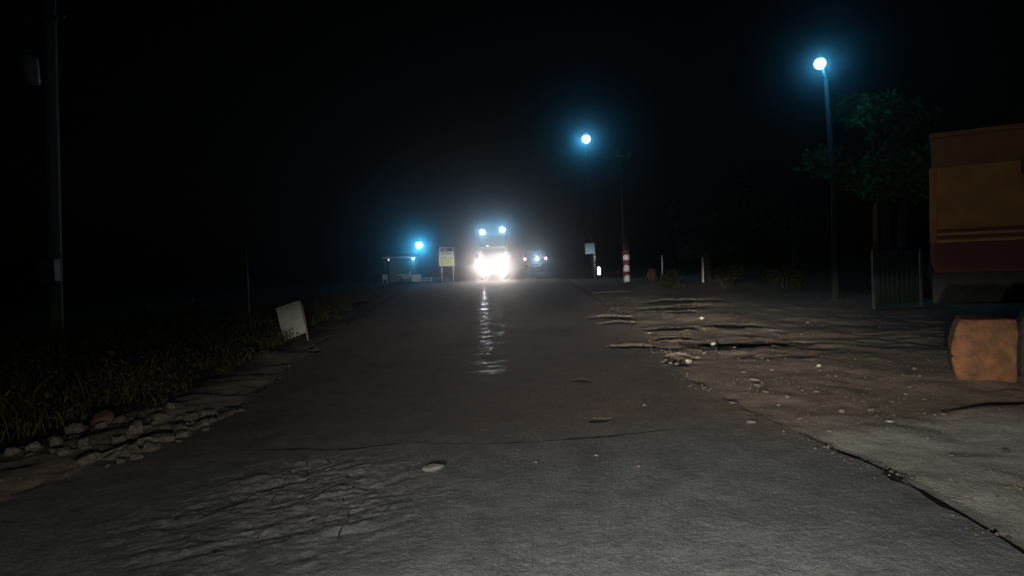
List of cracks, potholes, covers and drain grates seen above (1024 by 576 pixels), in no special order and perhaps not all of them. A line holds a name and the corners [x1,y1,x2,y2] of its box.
crack [189,423,730,566]
pothole [697,339,804,348]
crack [882,472,1024,554]
